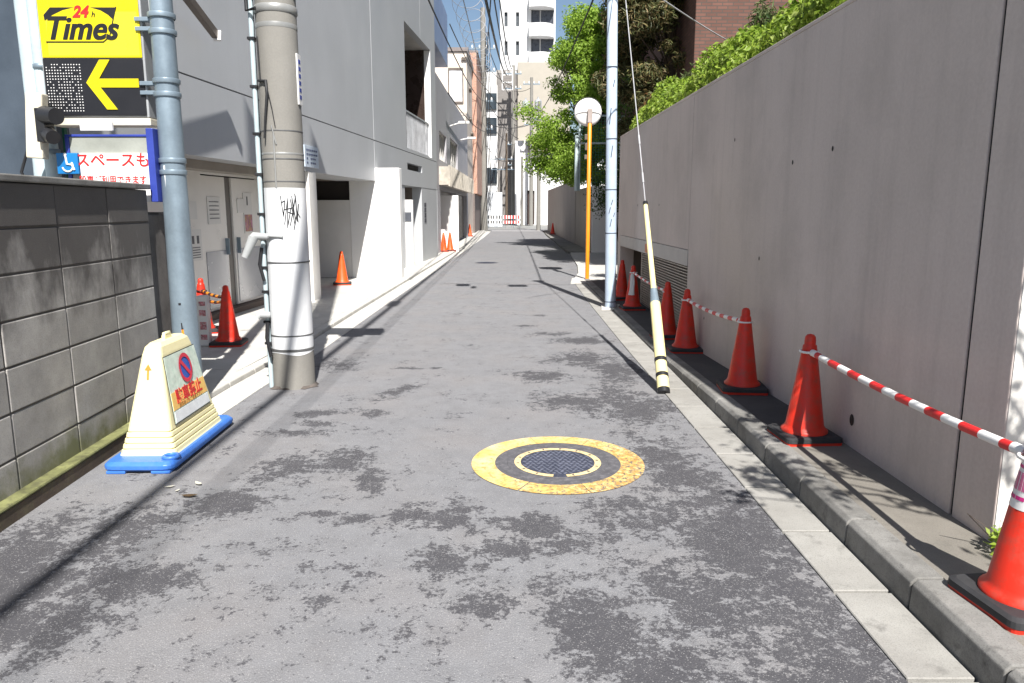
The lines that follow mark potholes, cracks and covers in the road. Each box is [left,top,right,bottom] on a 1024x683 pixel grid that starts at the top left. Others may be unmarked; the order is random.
manhole cover [471,436,645,494]
